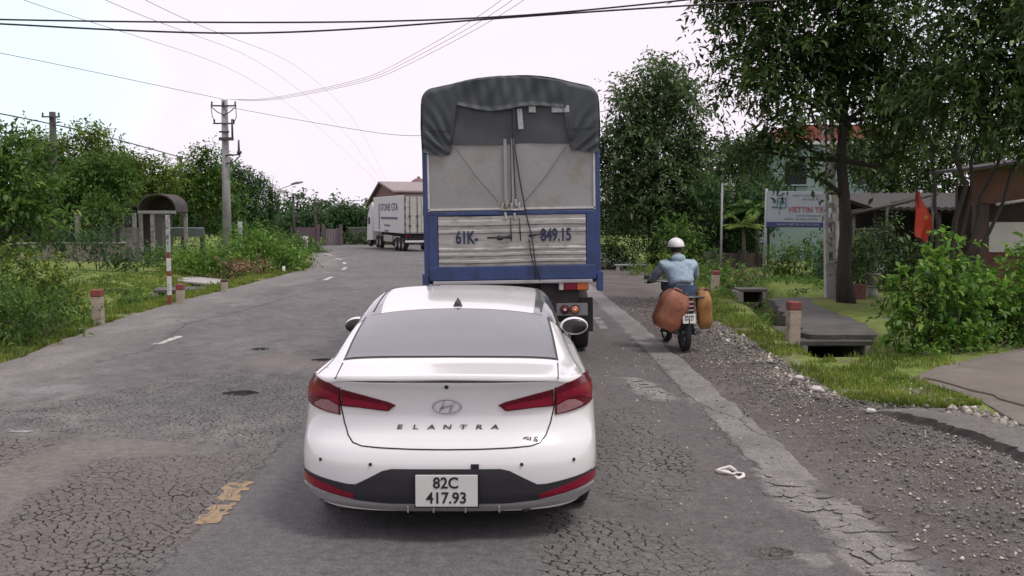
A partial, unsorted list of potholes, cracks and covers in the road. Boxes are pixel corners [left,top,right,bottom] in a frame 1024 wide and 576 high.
crack [0,294,311,576]
pothole [744,545,800,560]
crack [524,337,956,576]
